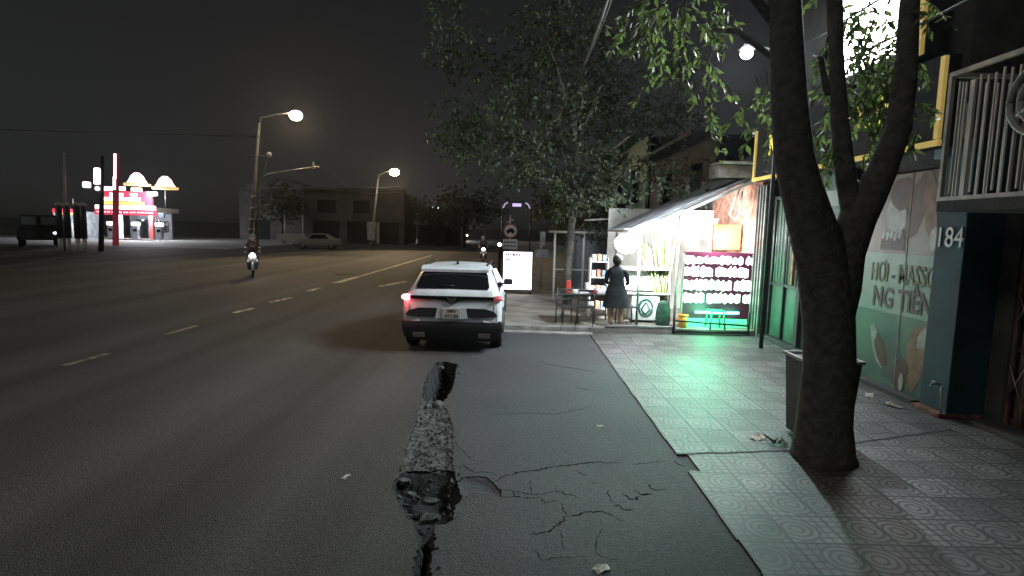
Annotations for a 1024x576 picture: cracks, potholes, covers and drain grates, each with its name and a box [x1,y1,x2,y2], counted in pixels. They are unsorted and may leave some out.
pothole [395,398,461,473]
pothole [422,362,463,409]
pothole [386,467,501,576]
crack [456,447,684,561]
